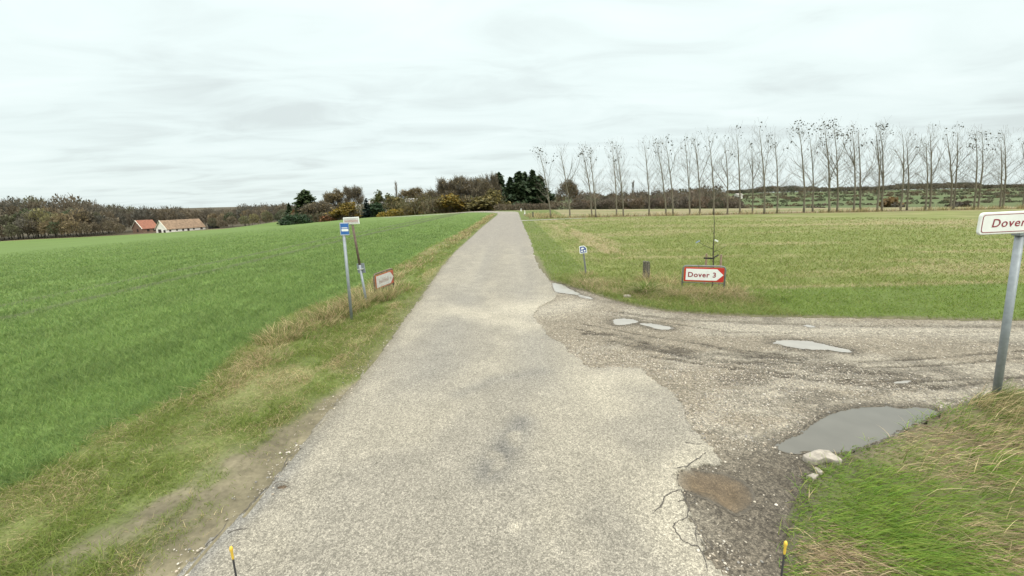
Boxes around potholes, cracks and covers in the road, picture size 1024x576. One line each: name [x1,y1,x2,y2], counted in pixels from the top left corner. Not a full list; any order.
pothole [636,322,675,330]
pothole [611,318,641,326]
pothole [551,283,581,295]
pothole [771,404,942,455]
pothole [768,339,857,353]
crack [655,489,713,573]
